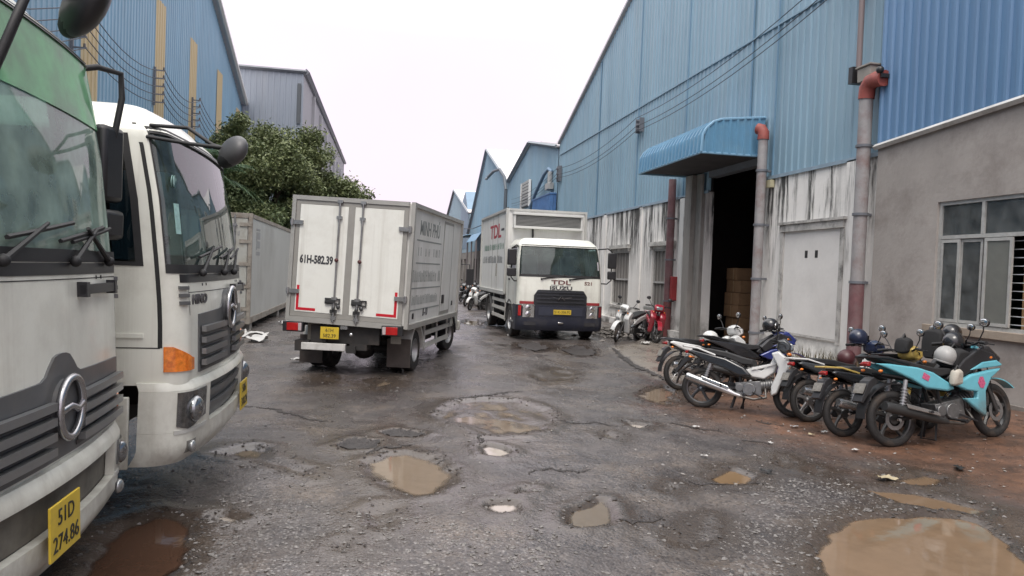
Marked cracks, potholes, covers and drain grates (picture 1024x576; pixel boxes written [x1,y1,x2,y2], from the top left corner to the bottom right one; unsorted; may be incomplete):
pothole [330,435,384,449]
pothole [423,396,562,436]
pothole [551,493,624,528]
pothole [854,484,1013,520]
pothole [357,449,464,496]
pothole [802,506,1024,576]
pothole [67,507,215,576]
crack [238,405,333,422]
pothole [560,345,601,356]
pothole [483,496,523,513]
pothole [708,466,757,484]
pothole [381,427,427,438]
